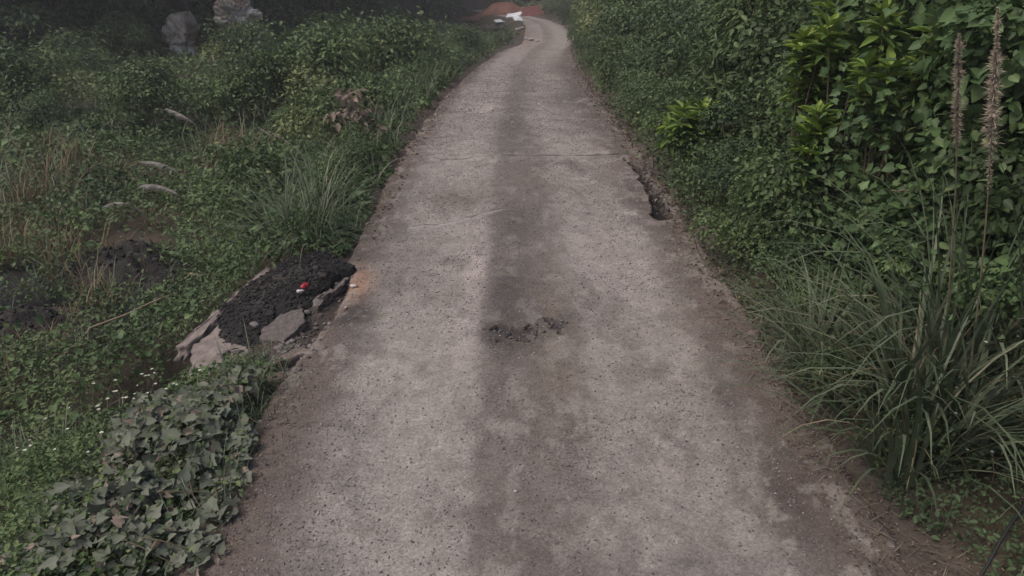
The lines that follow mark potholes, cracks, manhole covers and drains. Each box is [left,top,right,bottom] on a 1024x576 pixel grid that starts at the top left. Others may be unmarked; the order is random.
crack [401,205,513,231]
pothole [478,318,548,349]
pothole [614,156,685,226]
